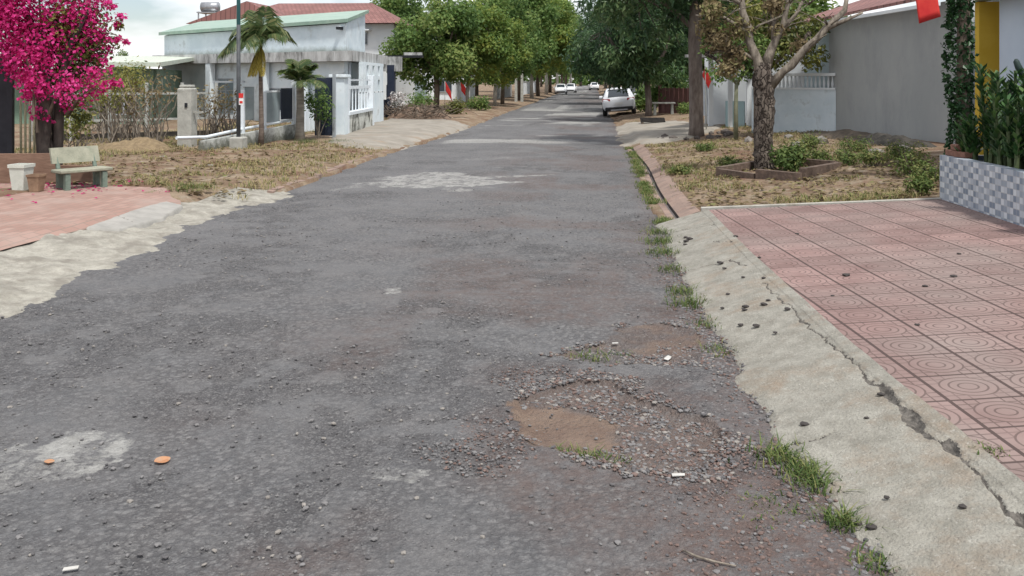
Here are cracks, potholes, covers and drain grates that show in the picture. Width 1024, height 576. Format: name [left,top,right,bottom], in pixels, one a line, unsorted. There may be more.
pothole [507,378,730,474]
pothole [558,323,711,365]
